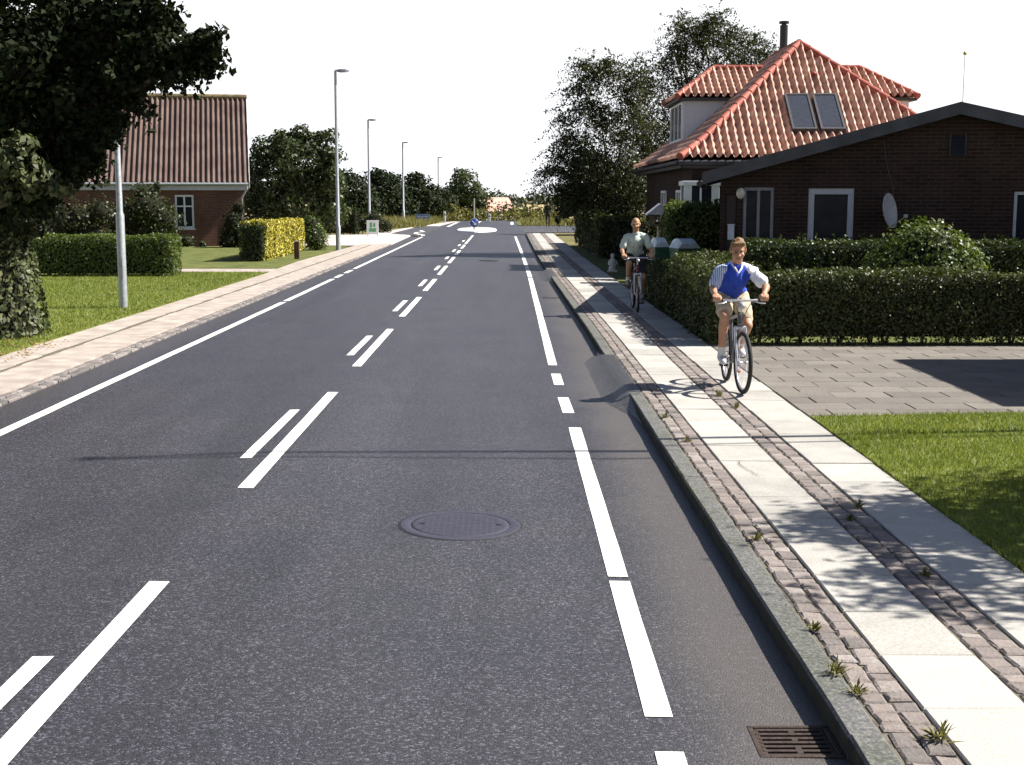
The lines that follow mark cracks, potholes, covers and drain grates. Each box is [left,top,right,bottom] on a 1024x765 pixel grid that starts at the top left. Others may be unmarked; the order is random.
drain grate [746,726,845,759]
manhole cover [398,510,523,541]
